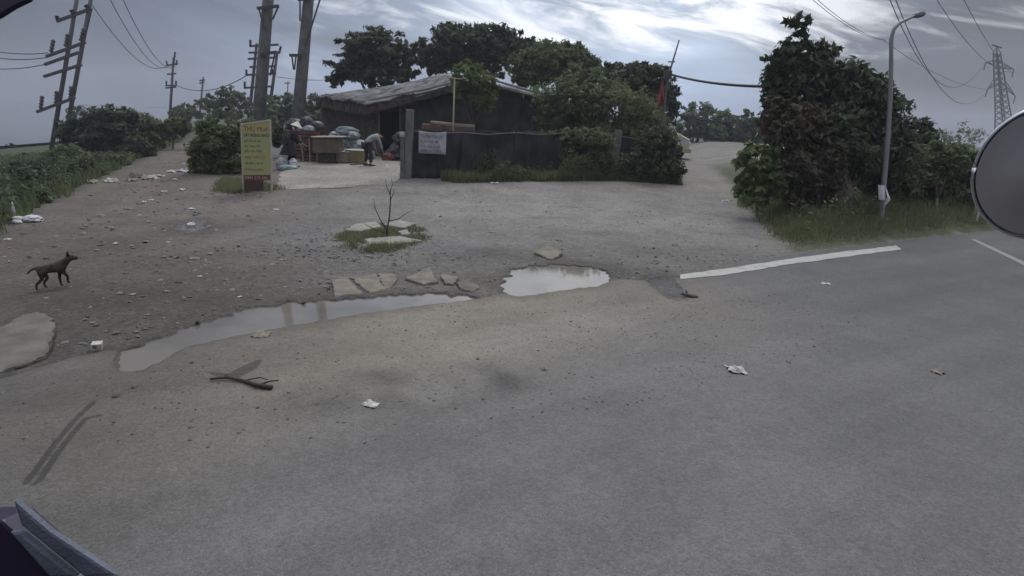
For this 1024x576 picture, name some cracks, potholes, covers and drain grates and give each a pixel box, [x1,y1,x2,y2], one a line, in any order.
pothole [499,263,612,294]
pothole [114,291,479,371]
